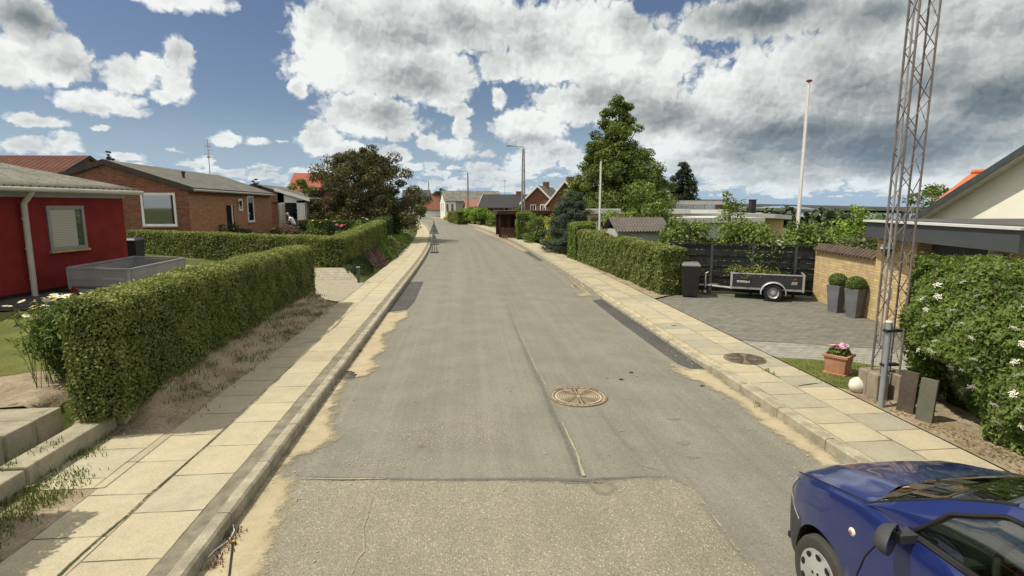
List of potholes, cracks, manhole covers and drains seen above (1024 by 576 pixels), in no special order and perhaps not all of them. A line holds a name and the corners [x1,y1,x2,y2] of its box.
manhole cover [724,353,766,365]
crack [294,477,385,574]
manhole cover [549,386,608,407]
